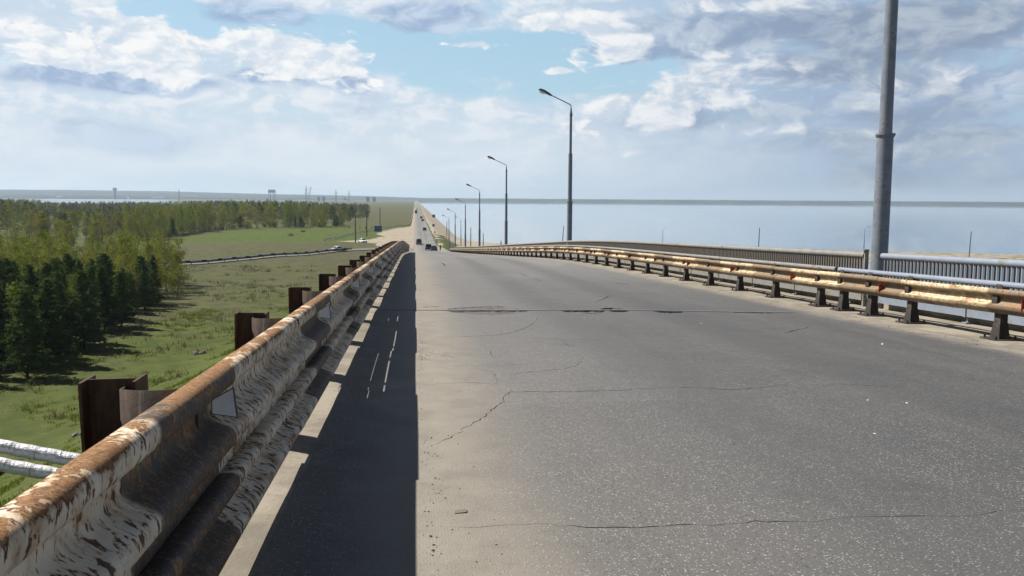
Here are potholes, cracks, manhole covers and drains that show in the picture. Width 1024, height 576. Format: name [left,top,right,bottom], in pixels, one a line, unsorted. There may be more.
crack [428,323,787,445]
crack [474,510,1012,528]
